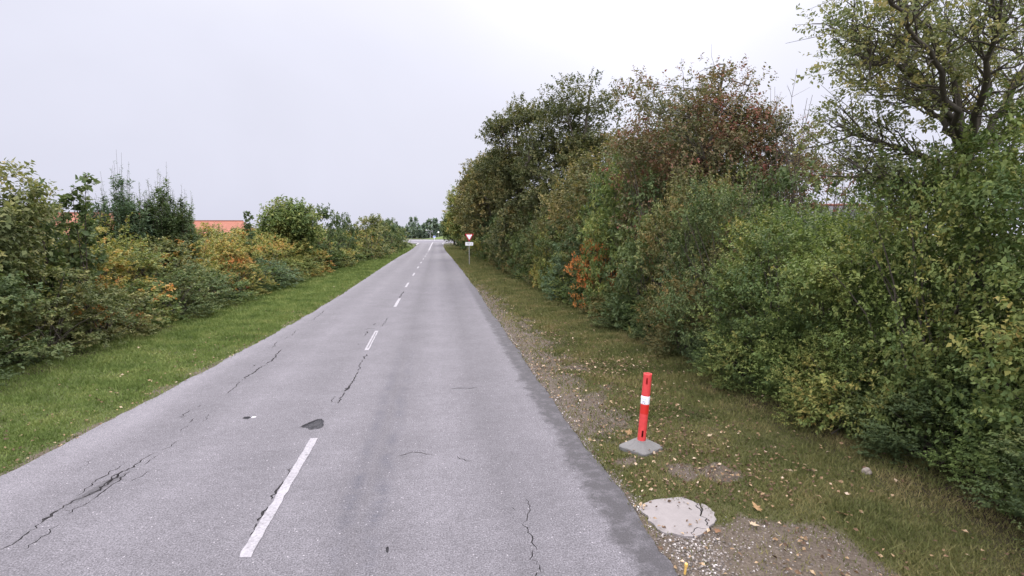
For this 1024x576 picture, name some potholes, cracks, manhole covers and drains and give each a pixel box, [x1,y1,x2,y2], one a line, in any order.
pothole [301,419,324,430]
crack [250,469,290,535]
crack [331,354,367,403]
crack [3,417,207,549]
crack [522,498,541,576]
